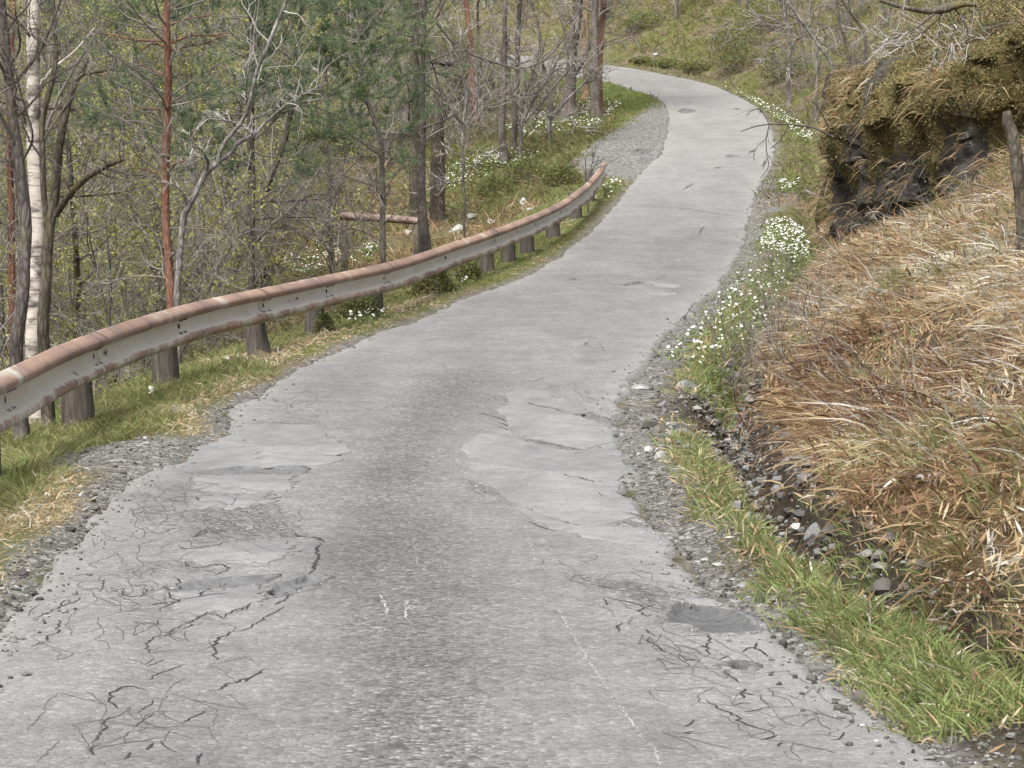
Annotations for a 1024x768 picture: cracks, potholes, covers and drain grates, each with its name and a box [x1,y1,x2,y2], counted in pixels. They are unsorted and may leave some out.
crack [541,550,854,762]
pothole [713,659,764,673]
crack [27,476,325,764]
pothole [165,573,282,592]
pothole [654,601,767,636]
